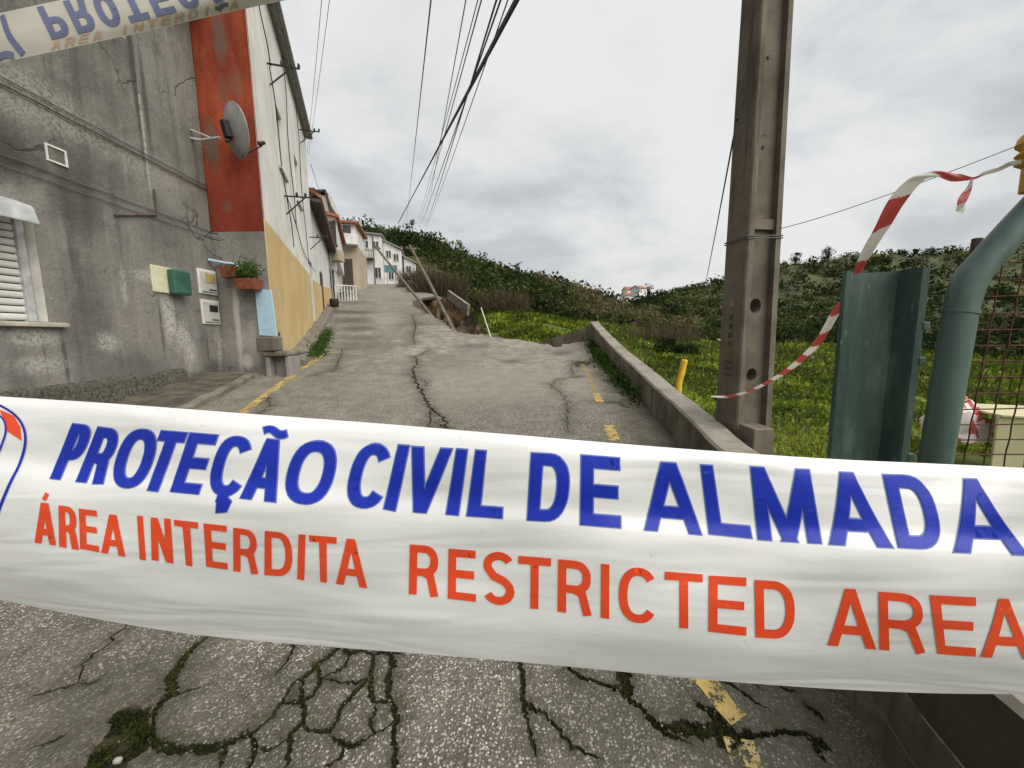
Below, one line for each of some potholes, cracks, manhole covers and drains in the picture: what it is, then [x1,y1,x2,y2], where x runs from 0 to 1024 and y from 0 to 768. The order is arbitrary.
crack [150,636,402,768]
crack [551,361,584,433]
crack [518,662,832,764]
crack [408,315,450,429]
crack [25,624,127,700]
